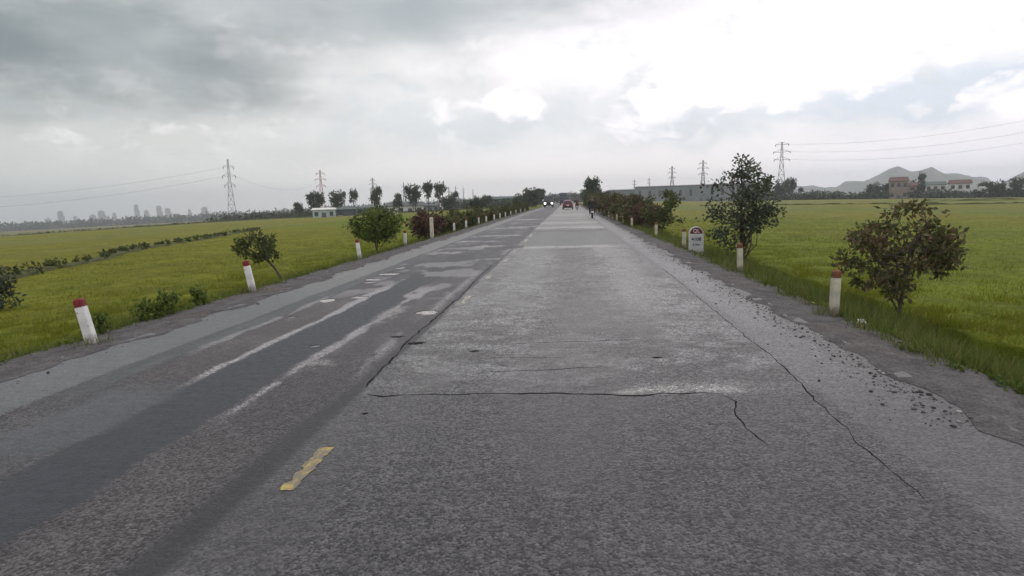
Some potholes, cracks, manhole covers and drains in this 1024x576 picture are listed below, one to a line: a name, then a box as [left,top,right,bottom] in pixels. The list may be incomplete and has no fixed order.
crack [366,265,767,444]
crack [667,272,925,500]
